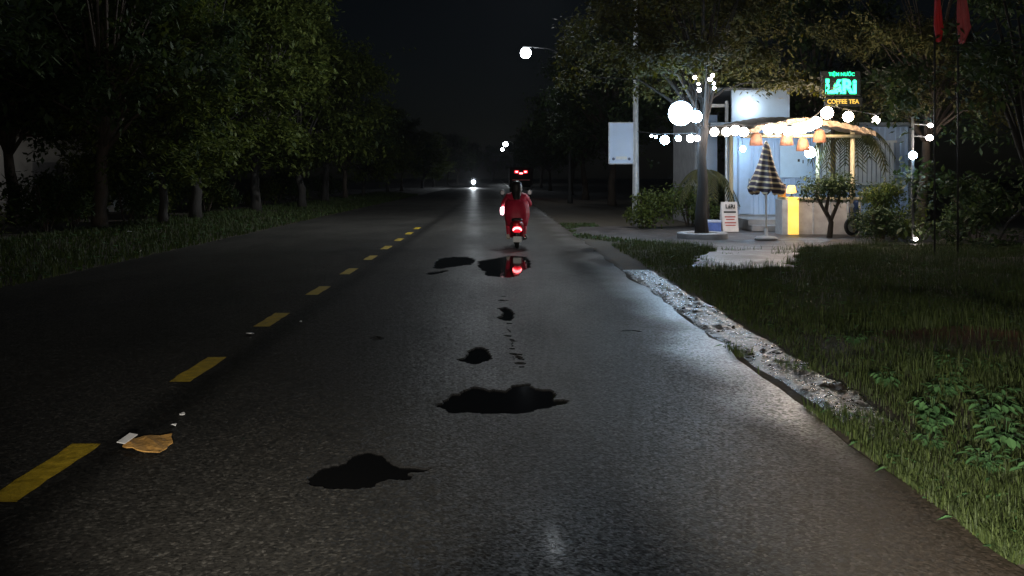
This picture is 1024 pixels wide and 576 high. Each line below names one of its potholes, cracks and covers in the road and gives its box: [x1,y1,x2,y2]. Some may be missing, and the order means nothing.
pothole [497,307,515,321]
pothole [432,383,569,414]
pothole [432,257,477,269]
pothole [305,450,432,490]
pothole [477,256,531,278]
pothole [457,347,493,365]
